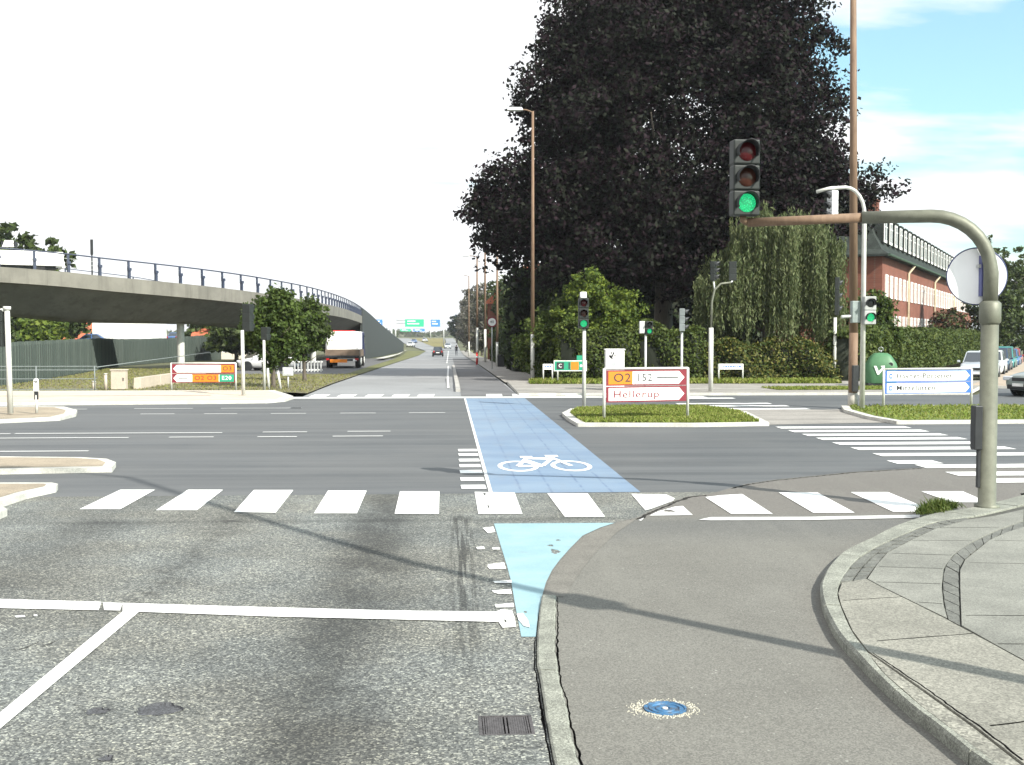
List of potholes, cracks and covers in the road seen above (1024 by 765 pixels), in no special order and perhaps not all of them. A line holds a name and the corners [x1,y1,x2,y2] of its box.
manhole cover [626,698,705,720]
crack [533,597,583,765]
drain grate [478,715,535,735]
